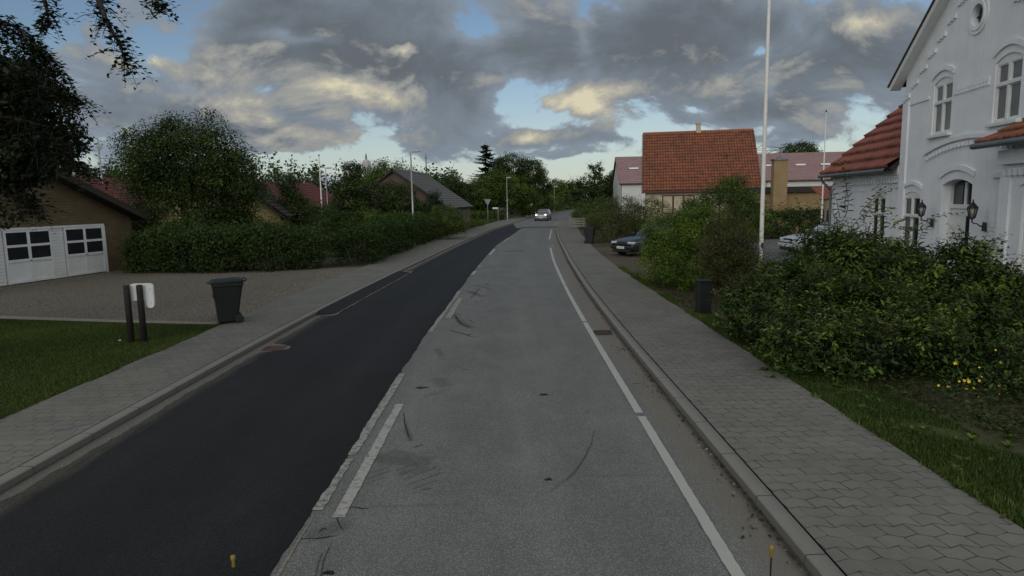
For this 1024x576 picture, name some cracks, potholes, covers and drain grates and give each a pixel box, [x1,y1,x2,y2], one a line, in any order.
crack [301,506,366,576]
crack [447,279,490,337]
